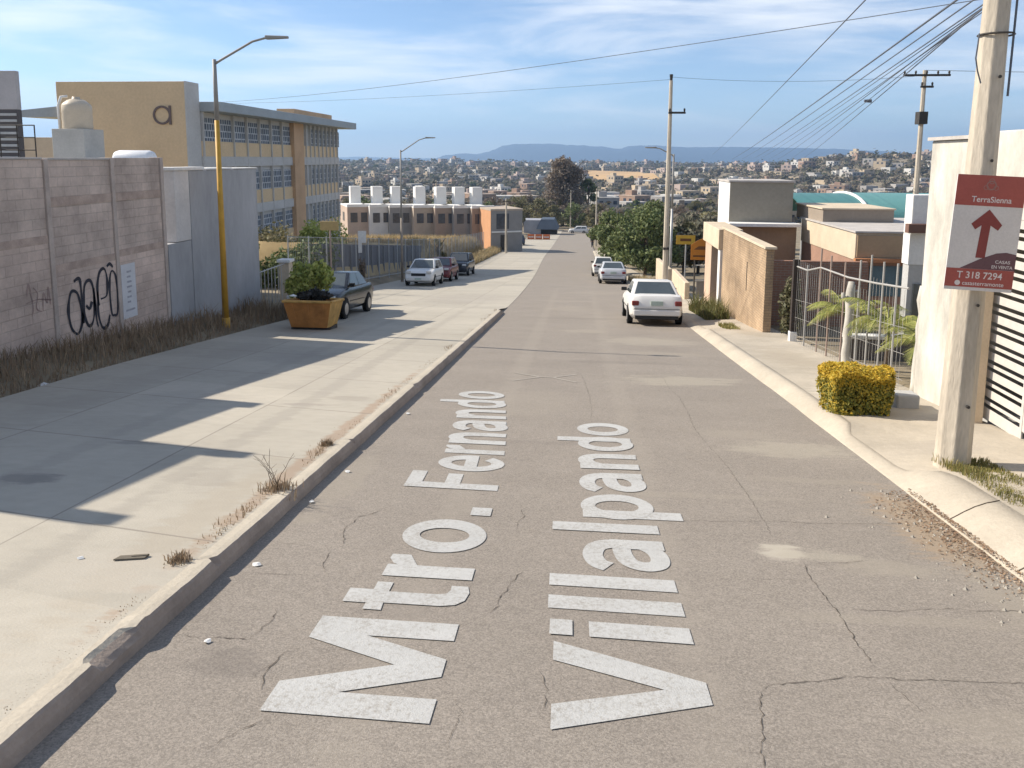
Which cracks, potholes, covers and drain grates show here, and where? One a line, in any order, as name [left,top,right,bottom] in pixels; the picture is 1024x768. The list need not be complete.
crack [740,561,1016,661]
crack [672,391,893,536]
crack [759,676,1020,767]
